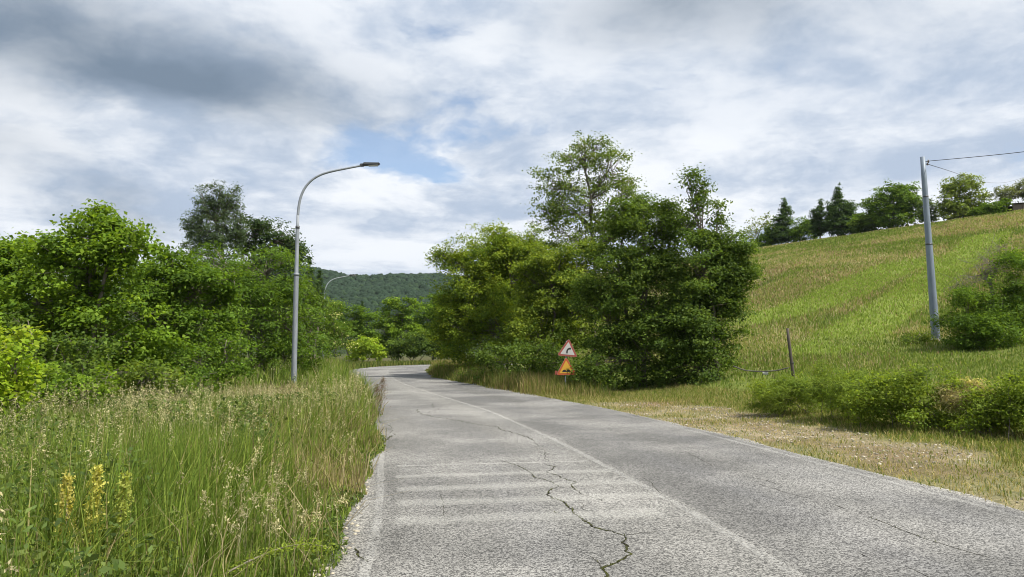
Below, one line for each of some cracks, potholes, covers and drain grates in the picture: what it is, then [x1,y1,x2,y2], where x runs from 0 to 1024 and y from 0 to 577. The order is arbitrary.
crack [417,406,656,577]
crack [692,455,997,560]
